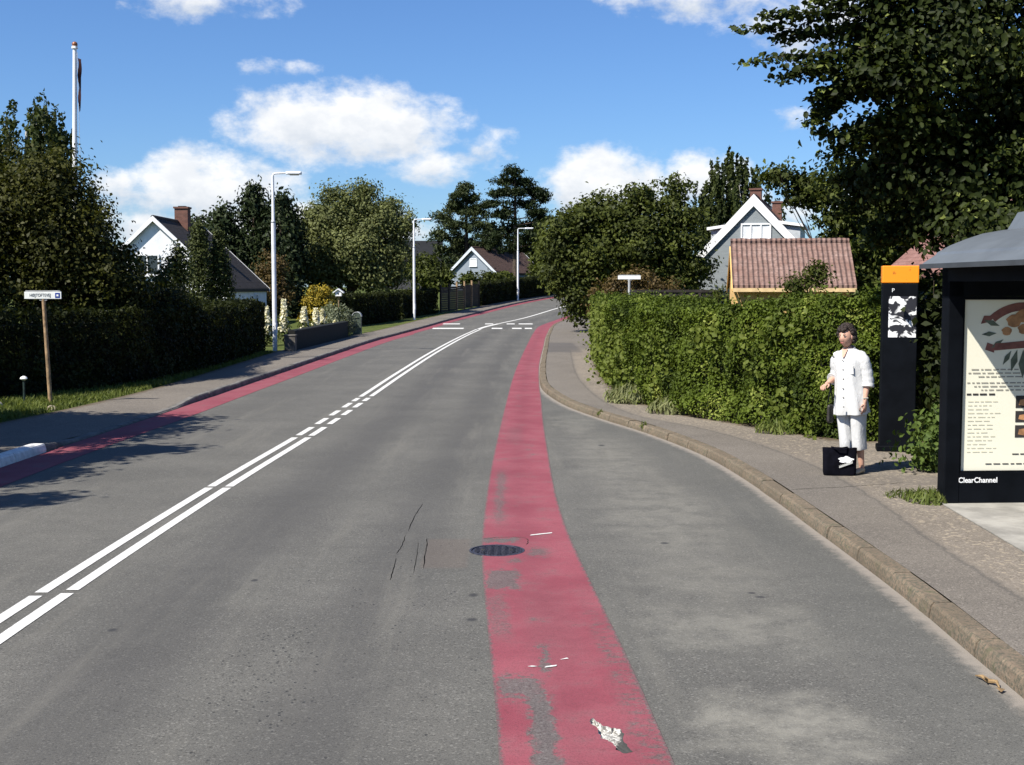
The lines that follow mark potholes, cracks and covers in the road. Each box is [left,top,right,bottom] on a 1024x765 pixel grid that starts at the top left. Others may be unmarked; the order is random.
crack [390,505,428,579]
manhole cover [469,544,525,556]
